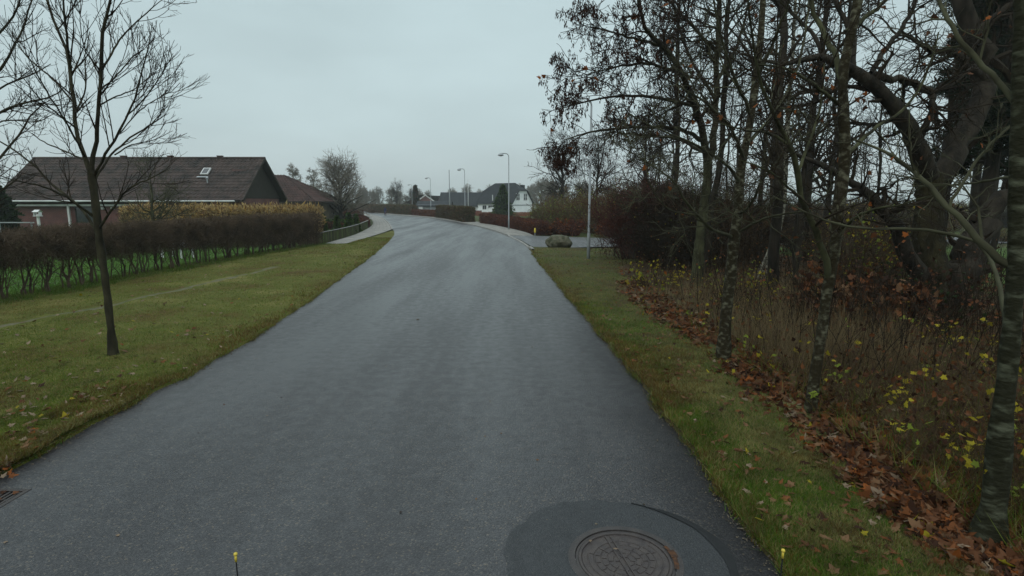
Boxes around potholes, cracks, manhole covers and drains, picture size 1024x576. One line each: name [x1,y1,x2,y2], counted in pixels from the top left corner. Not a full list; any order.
drain grate [0,489,31,508]
manhole cover [568,526,684,576]
